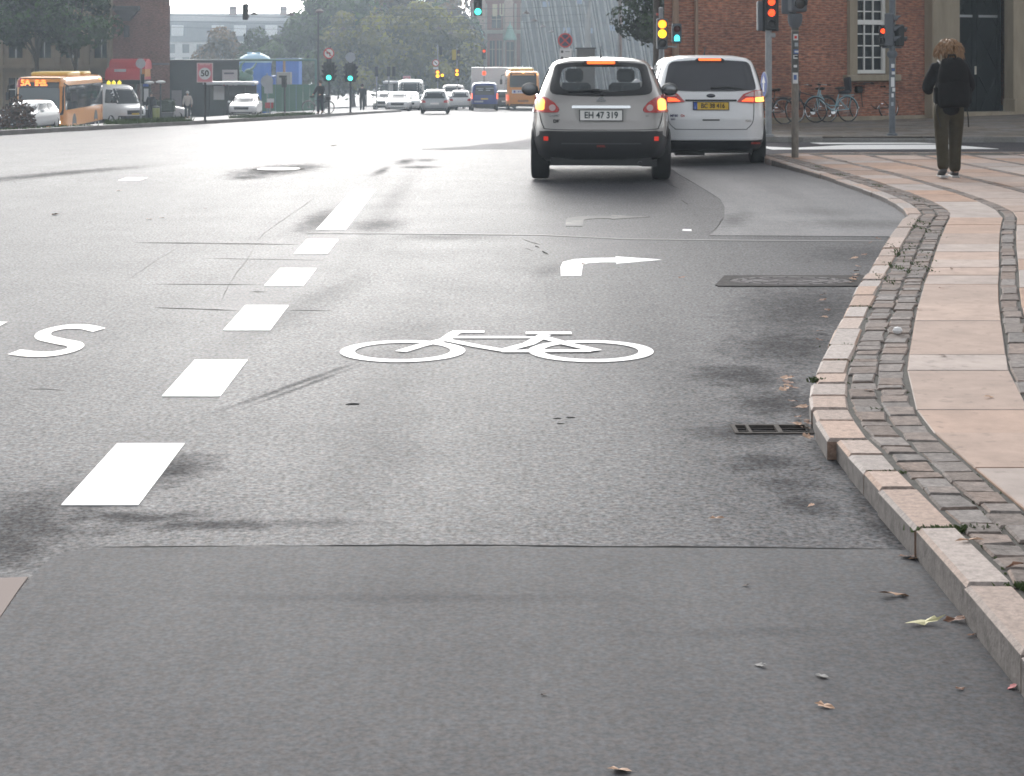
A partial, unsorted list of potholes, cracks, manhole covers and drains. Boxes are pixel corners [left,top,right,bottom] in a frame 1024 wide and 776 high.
drain grate [730,424,815,434]
crack [131,243,299,311]
manhole cover [715,275,865,287]
